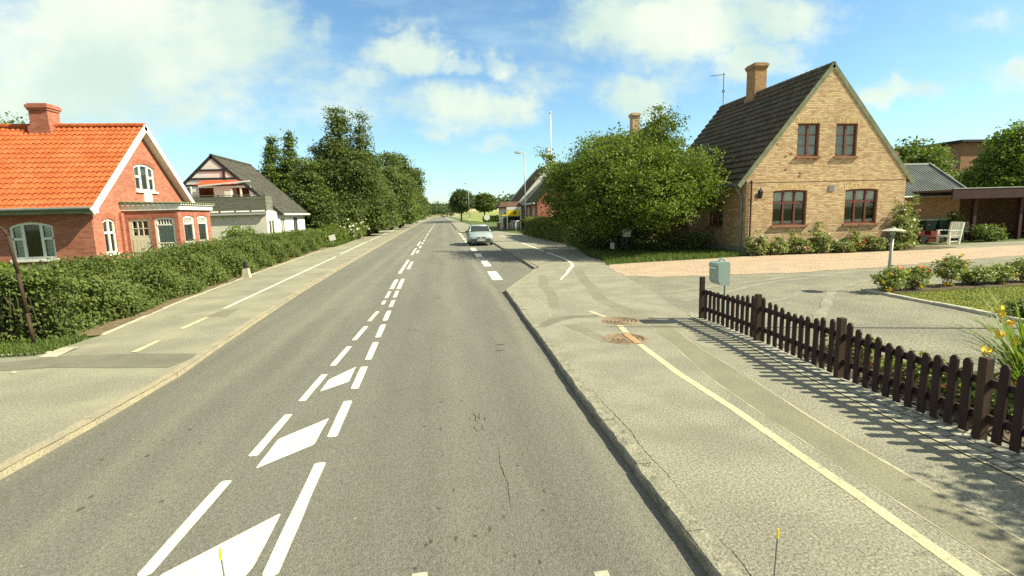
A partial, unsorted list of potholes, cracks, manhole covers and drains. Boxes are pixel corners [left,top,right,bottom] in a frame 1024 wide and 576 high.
manhole cover [602,317,641,325]
crack [593,391,691,504]
manhole cover [602,333,648,344]
